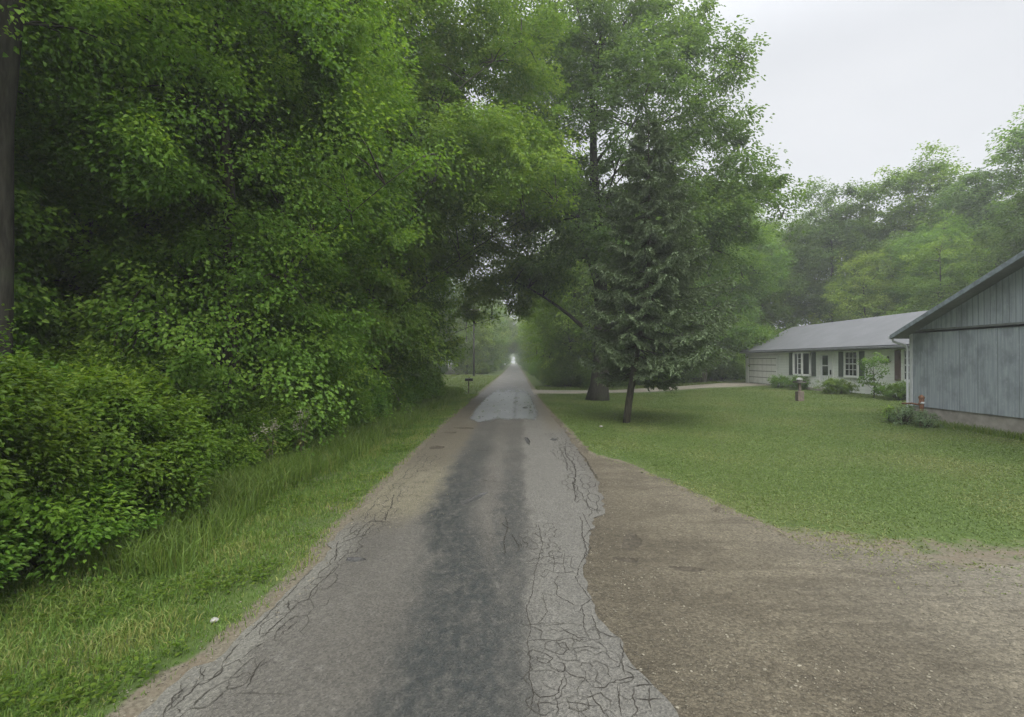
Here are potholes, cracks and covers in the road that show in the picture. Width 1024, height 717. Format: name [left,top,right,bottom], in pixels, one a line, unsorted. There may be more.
crack [163,454,441,717]
crack [503,432,663,717]
